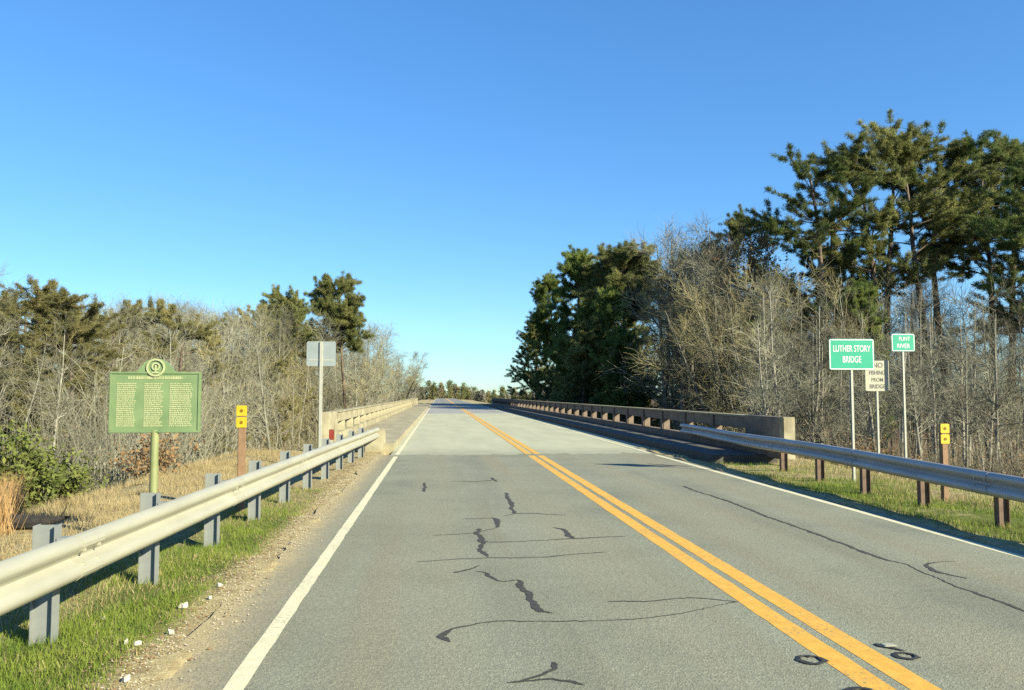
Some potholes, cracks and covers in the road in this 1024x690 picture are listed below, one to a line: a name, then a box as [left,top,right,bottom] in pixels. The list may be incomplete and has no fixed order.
crack [418,478,738,642]
crack [507,662,584,685]
crack [683,486,1024,611]
